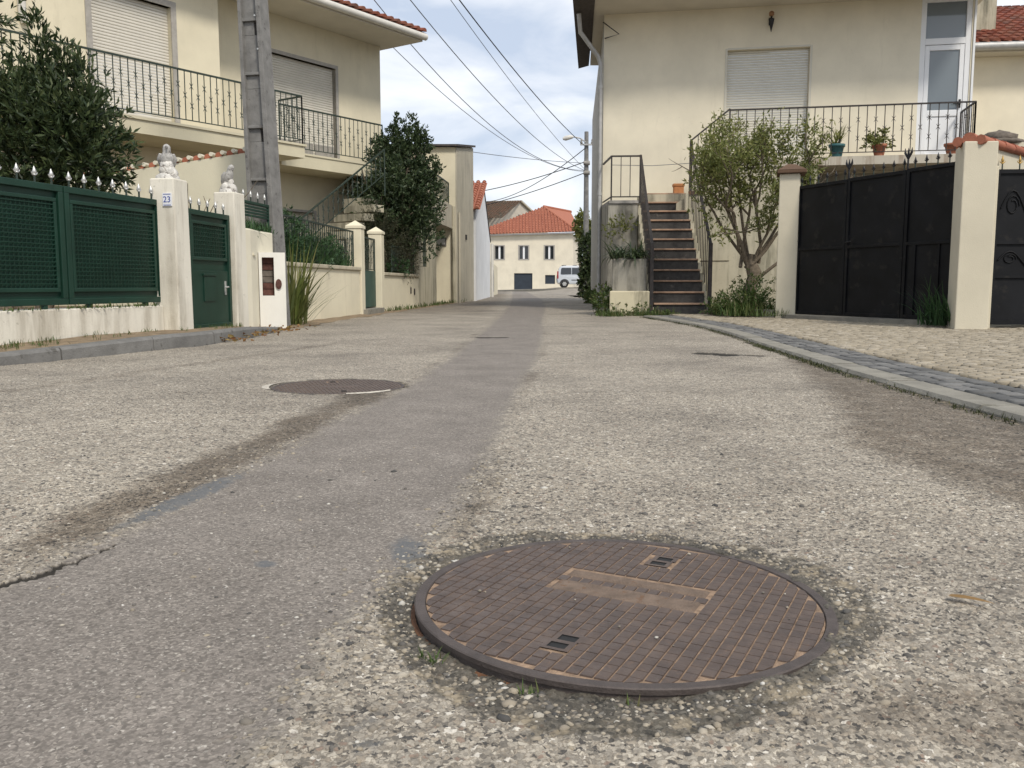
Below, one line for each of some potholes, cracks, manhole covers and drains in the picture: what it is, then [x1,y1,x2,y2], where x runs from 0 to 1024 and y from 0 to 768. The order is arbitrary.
manhole cover [411,539,839,701]
manhole cover [262,379,405,394]
